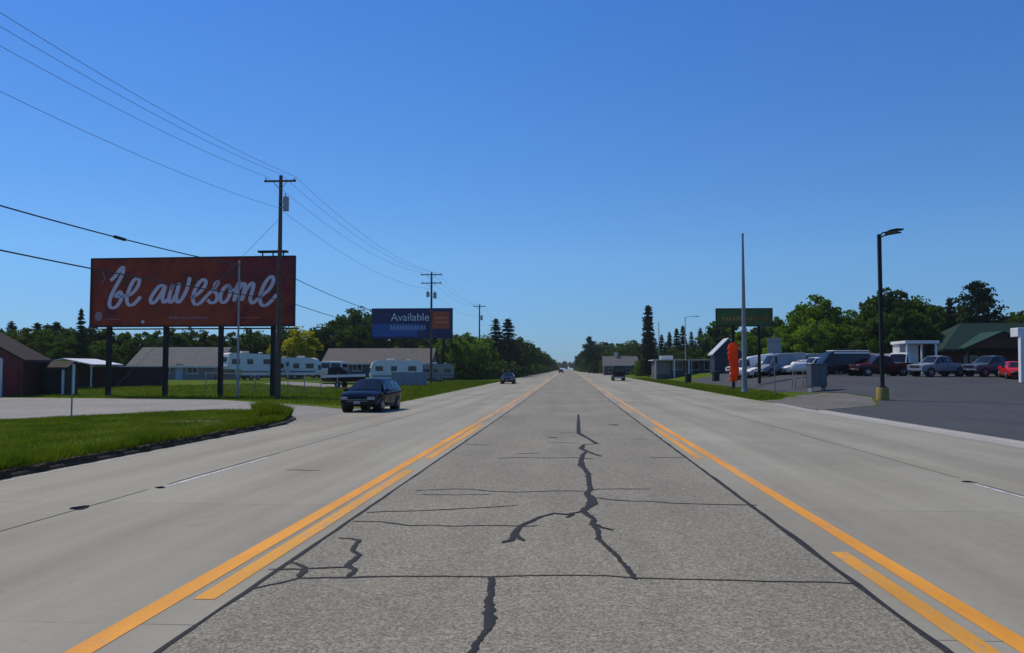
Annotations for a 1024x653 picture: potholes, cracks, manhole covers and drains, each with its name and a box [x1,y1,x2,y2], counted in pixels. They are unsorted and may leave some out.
crack [511,442,569,458]
crack [248,489,853,590]
